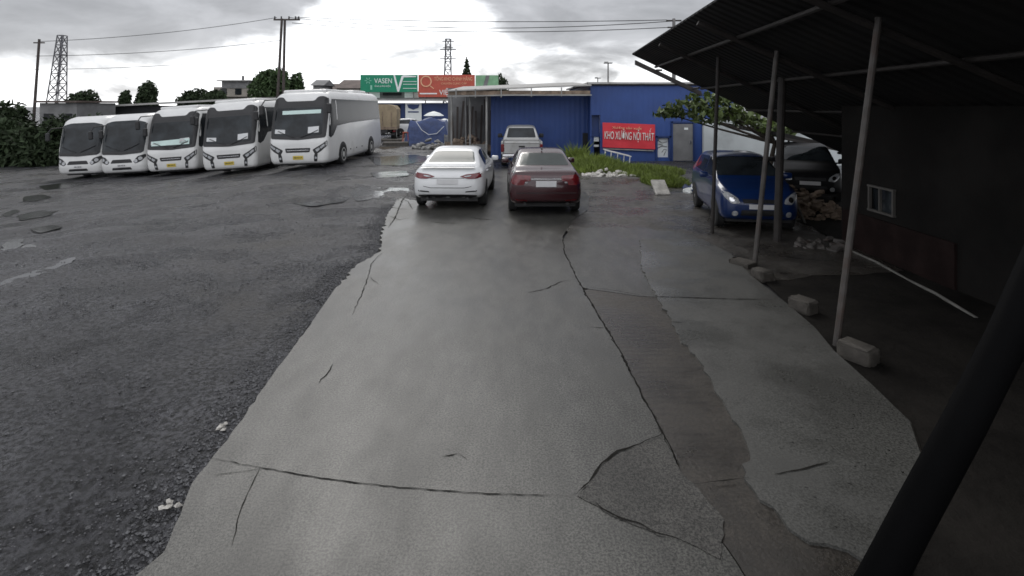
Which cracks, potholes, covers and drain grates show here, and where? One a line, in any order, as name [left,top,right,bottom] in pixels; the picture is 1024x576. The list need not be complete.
crack [532,237,773,539]
crack [695,461,830,484]
crack [213,458,574,543]
